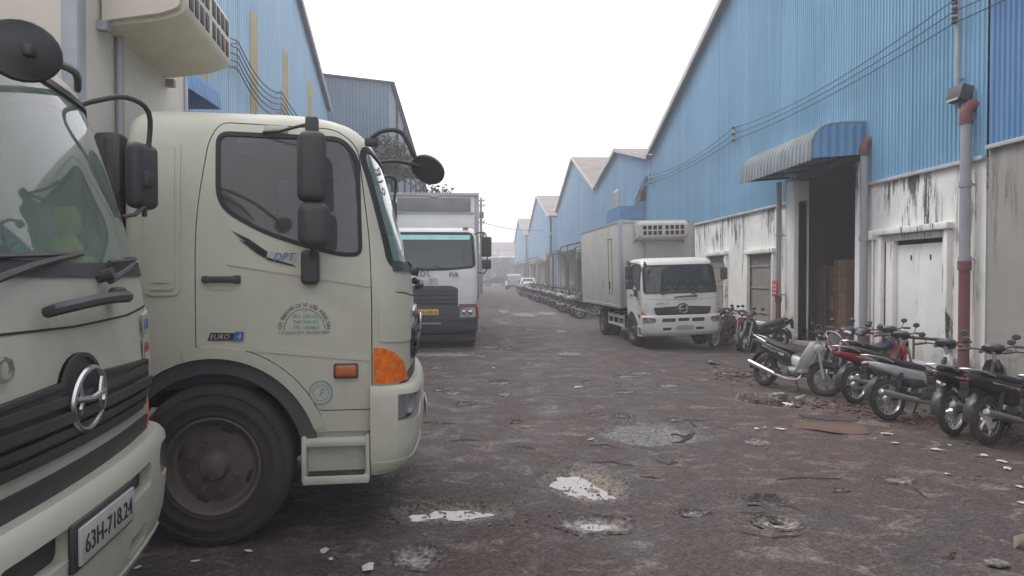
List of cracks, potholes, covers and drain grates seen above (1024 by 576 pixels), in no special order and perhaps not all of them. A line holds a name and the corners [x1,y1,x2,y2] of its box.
pothole [737,493,795,506]
pothole [877,475,918,485]
pothole [543,514,637,536]
pothole [535,463,633,506]
pothole [674,508,714,518]
pothole [734,391,818,410]
pothole [750,513,806,532]
pothole [381,501,516,526]
pothole [391,543,444,572]
